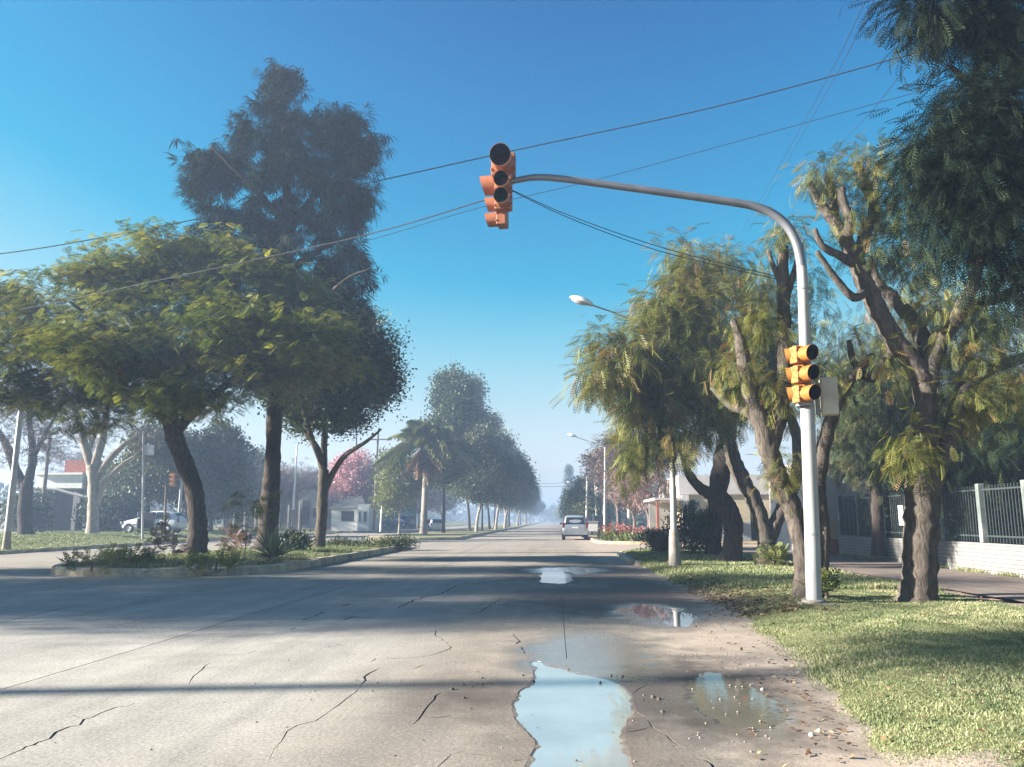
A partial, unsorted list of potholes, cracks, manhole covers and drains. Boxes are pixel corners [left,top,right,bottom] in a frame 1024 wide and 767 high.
pothole [681,670,797,732]
crack [1,703,134,759]
crack [630,711,715,767]
pothole [628,603,701,627]
pothole [524,569,591,585]
pothole [511,660,636,767]
crack [269,630,452,760]
crack [393,576,531,658]
